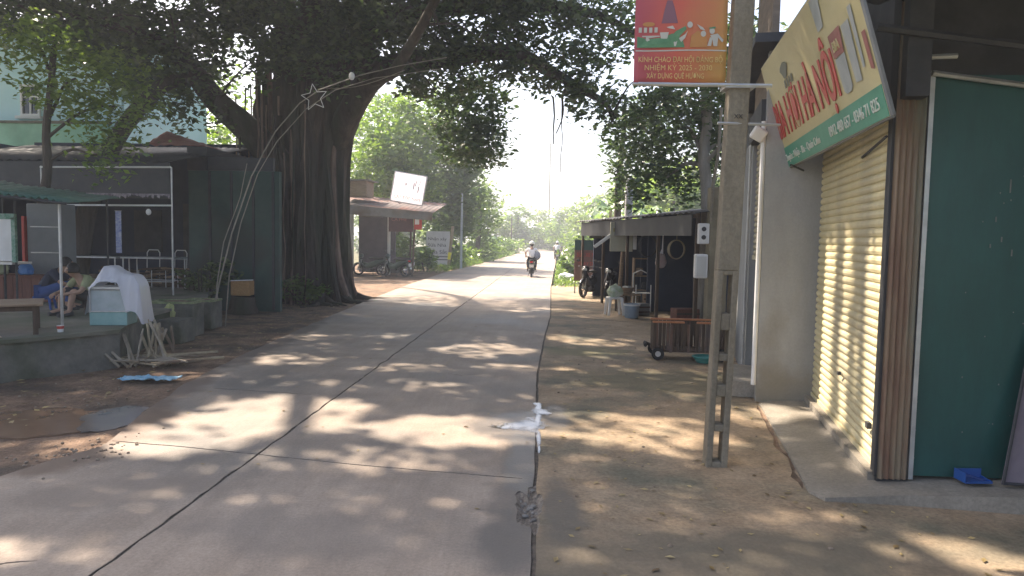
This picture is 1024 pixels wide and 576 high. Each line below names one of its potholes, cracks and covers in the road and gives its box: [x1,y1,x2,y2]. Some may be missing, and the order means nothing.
crack [757,407,803,488]
pothole [516,486,543,535]
